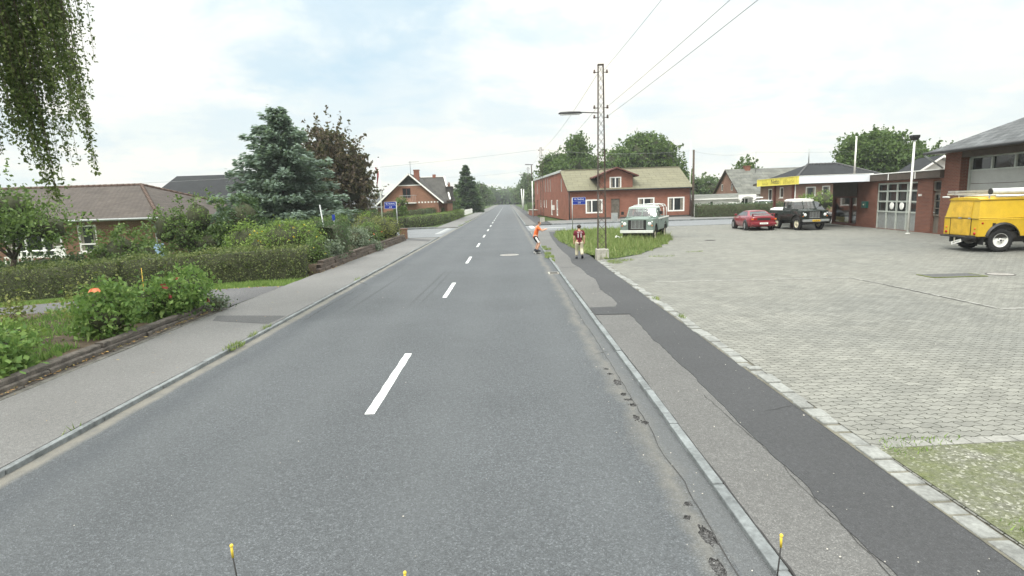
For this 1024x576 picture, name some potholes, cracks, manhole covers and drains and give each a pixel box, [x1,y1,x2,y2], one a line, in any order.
pothole [707,557,727,576]
pothole [698,524,719,547]
